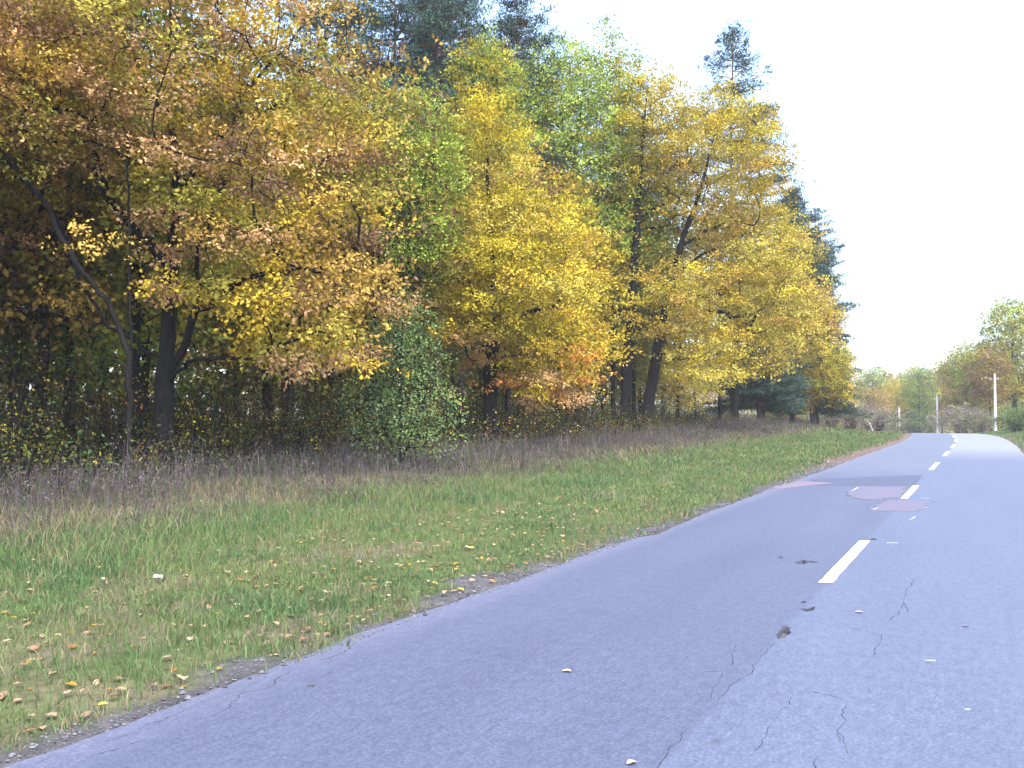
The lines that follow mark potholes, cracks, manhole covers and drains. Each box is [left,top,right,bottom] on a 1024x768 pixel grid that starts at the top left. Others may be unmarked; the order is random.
crack [697,638,775,703]
pothole [775,626,791,639]
crack [754,692,848,754]
